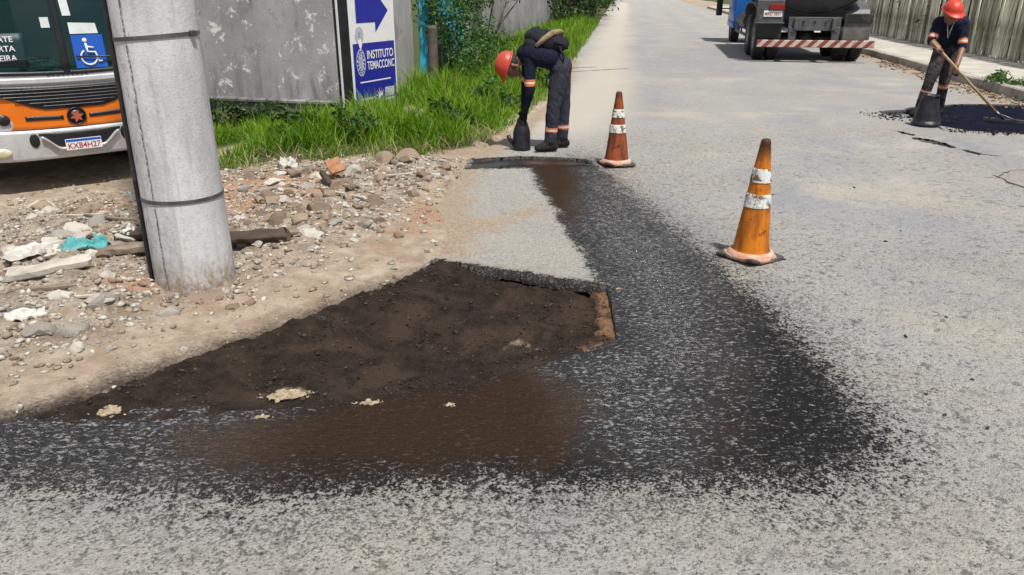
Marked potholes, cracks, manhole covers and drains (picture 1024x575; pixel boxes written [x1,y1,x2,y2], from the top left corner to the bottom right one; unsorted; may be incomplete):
pothole [32,258,616,422]
